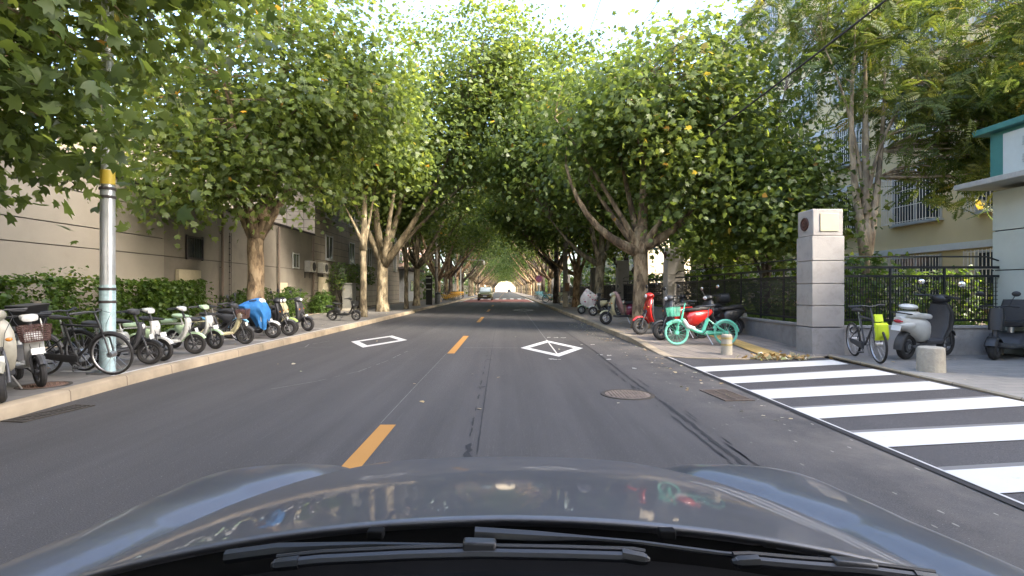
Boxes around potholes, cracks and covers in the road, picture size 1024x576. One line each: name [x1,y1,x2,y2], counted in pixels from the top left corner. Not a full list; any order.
drain grate [700,389,755,401]
manhole cover [601,389,655,400]
drain grate [0,404,95,423]
